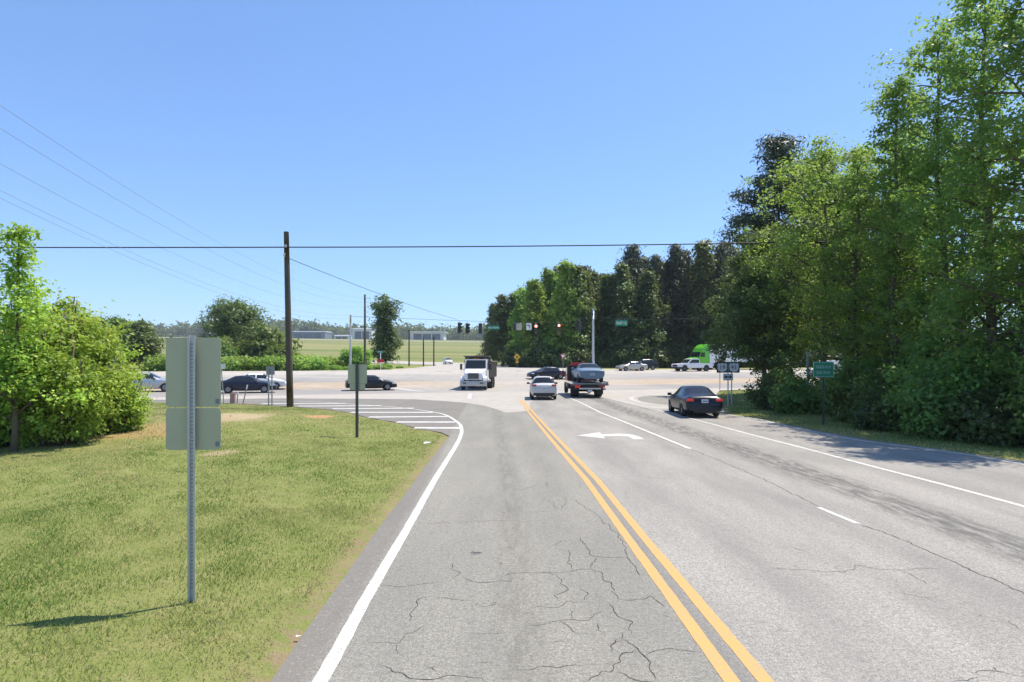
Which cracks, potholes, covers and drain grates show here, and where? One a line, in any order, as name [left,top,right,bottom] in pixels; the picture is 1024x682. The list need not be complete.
crack [378,525,696,682]
